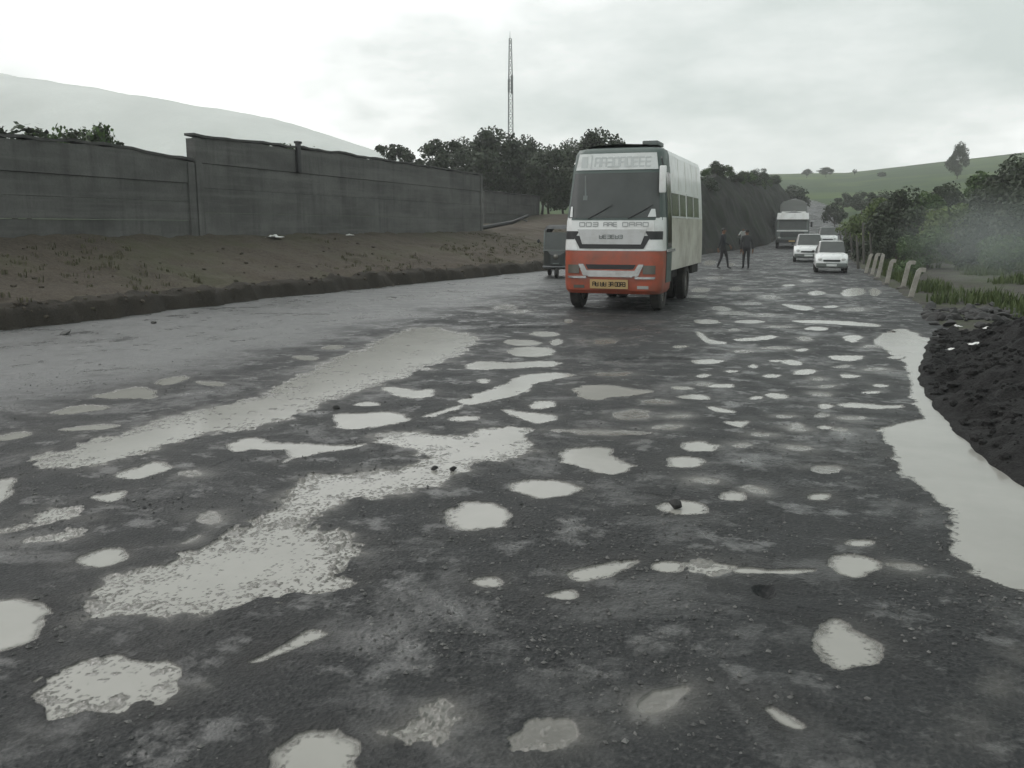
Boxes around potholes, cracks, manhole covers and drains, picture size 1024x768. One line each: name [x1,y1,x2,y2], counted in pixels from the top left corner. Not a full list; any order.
pothole [0,594,65,657]
pothole [818,550,890,580]
pothole [552,443,646,476]
pothole [22,650,209,723]
pothole [370,692,471,755]
pothole [502,476,587,500]
pothole [626,679,699,719]
pothole [867,328,1024,597]
pothole [658,454,713,469]
pothole [558,556,646,585]
pothole [249,721,374,768]
pothole [22,326,483,469]
